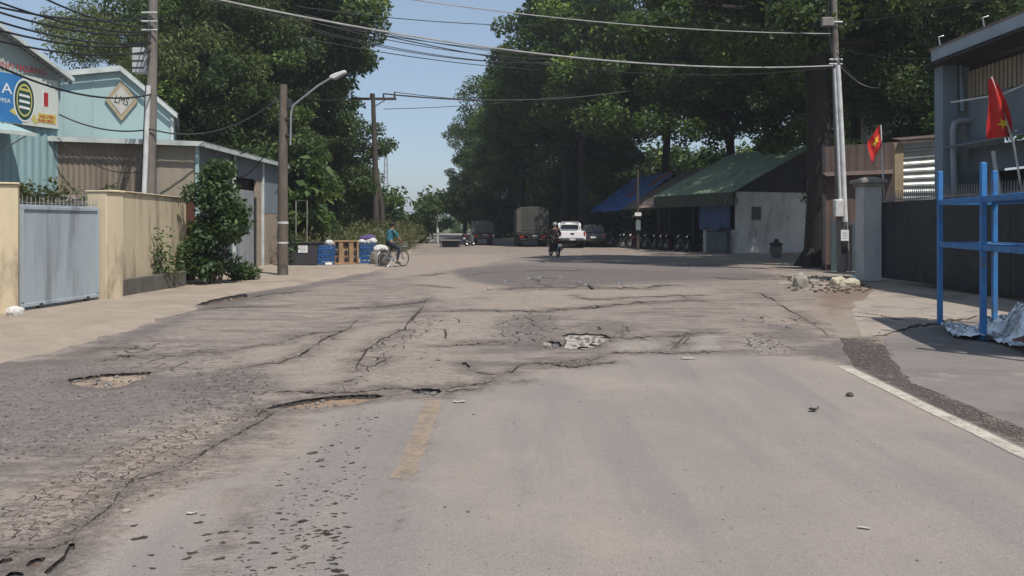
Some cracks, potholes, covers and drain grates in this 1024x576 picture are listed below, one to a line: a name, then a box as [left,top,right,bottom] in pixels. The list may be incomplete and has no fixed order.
pothole [411,388,442,397]
crack [873,316,978,337]
pothole [563,333,611,349]
pothole [68,372,151,388]
crack [0,270,829,556]
pothole [26,557,46,567]
pothole [267,394,383,410]
pothole [197,294,247,305]
